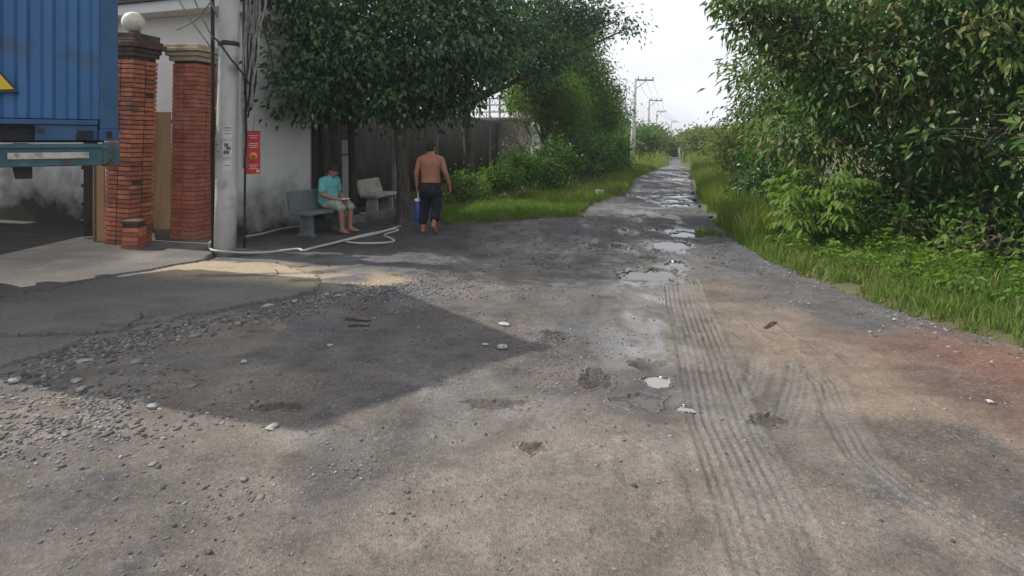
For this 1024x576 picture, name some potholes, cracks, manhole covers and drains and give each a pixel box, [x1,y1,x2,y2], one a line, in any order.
pothole [740,409,798,430]
pothole [600,390,670,414]
pothole [531,328,583,346]
pothole [515,439,552,457]
pothole [636,240,697,252]
pothole [637,375,676,390]
pothole [660,259,693,268]
pothole [448,397,543,412]
pothole [573,363,618,393]
pothole [613,265,690,285]
